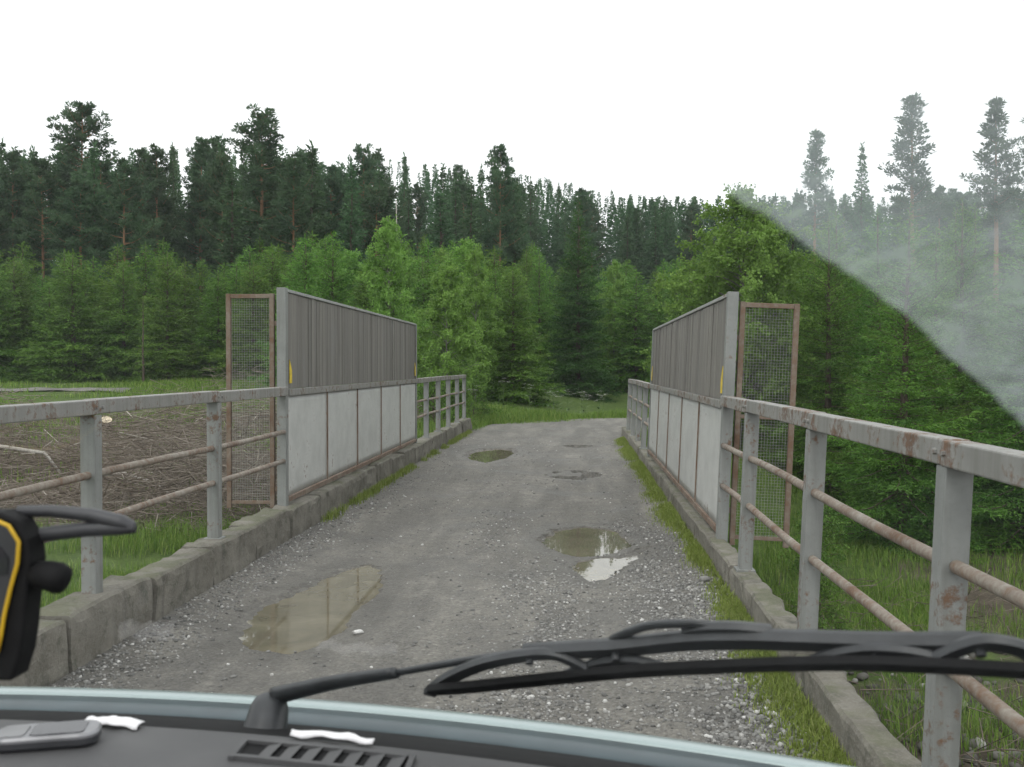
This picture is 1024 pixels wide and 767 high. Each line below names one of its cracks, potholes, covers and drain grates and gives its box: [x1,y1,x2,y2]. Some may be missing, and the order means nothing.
pothole [463,447,519,463]
pothole [220,563,389,655]
pothole [544,469,602,481]
pothole [534,526,640,557]
pothole [568,545,657,582]
